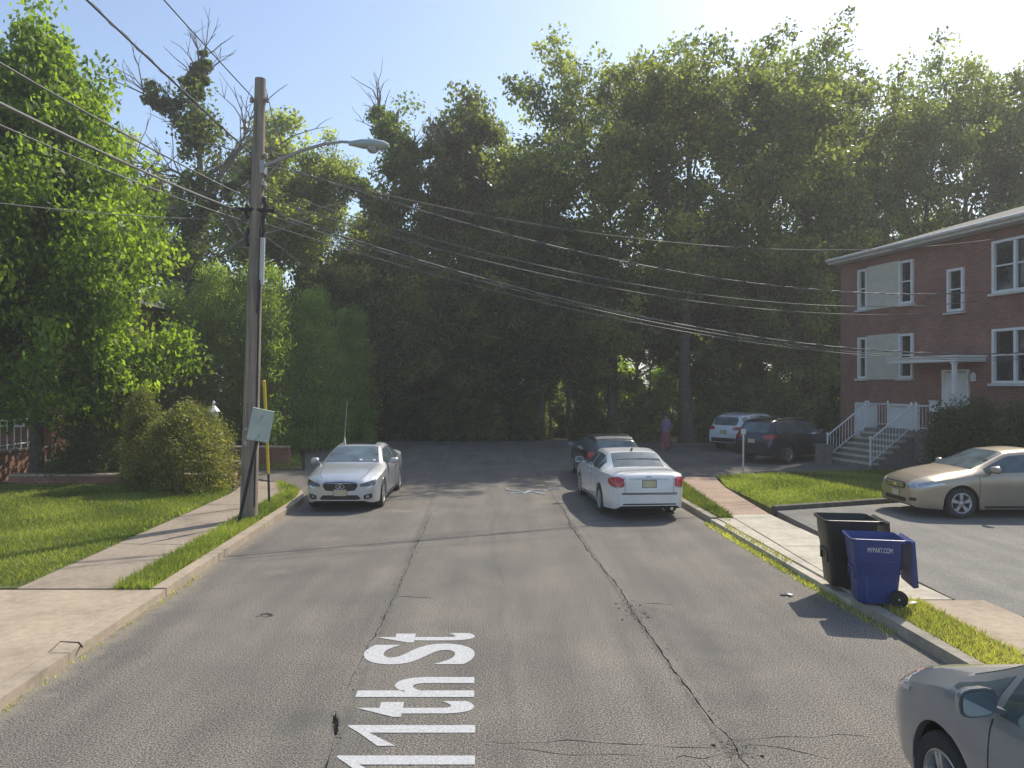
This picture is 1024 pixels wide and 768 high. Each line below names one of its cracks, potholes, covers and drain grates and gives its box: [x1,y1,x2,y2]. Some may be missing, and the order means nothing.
pothole [329,710,341,737]
crack [615,596,673,626]
crack [490,732,873,768]
